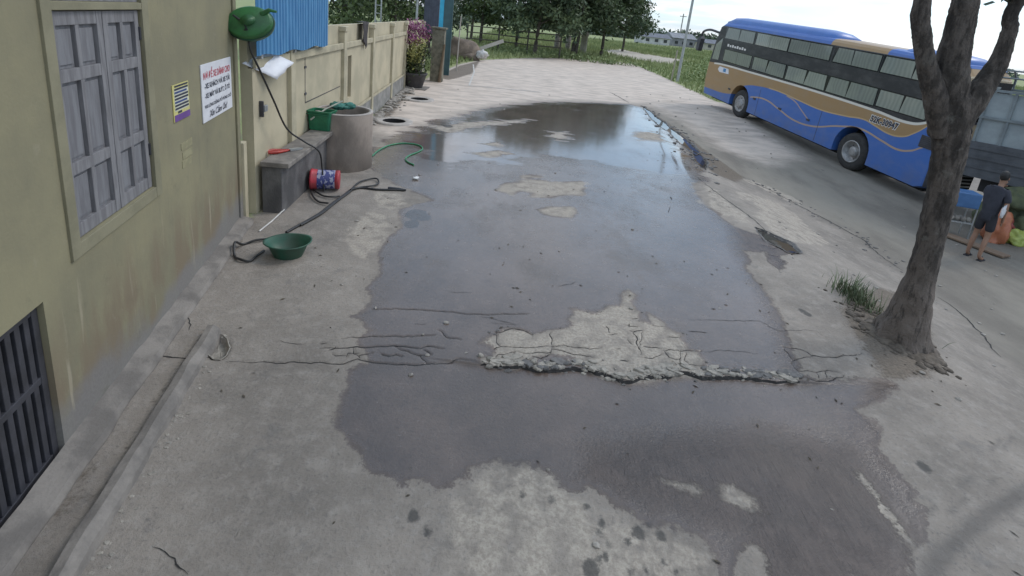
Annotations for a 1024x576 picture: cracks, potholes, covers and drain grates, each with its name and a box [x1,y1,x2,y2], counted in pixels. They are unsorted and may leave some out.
pothole [755,227,803,255]
crack [320,331,460,363]
crack [154,547,188,574]
crack [377,309,862,384]
crack [750,180,903,271]
manhole cover [375,117,413,126]
